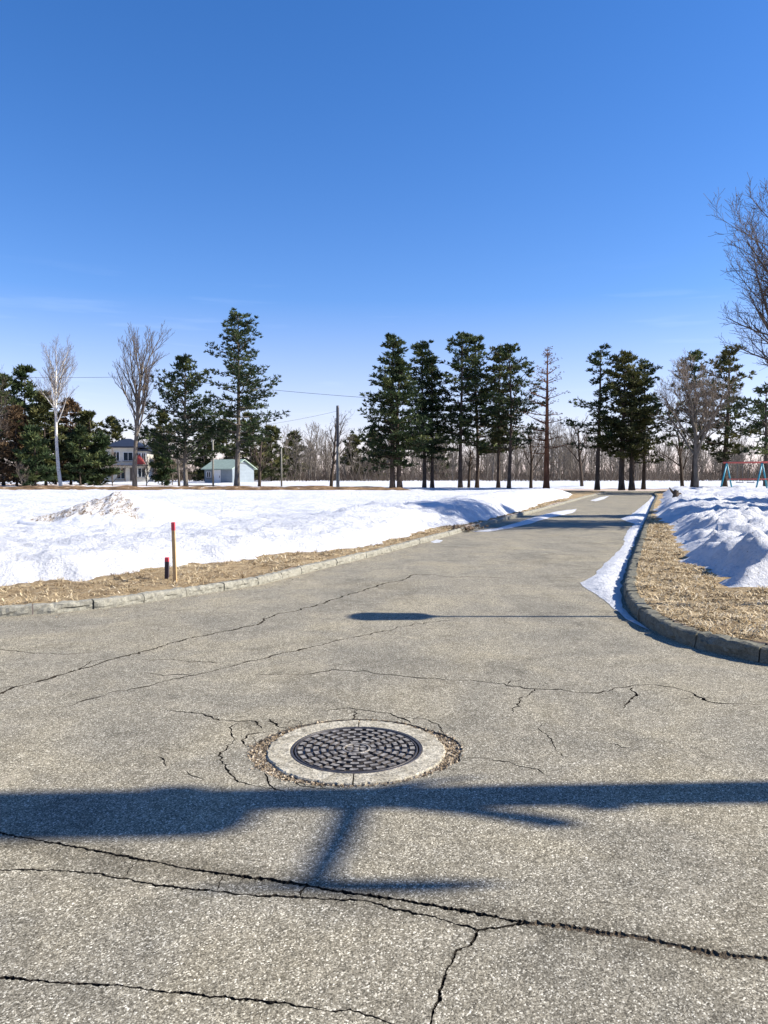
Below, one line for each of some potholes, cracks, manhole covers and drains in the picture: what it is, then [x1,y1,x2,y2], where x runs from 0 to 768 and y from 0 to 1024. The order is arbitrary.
crack [458,724,567,776]
manhole cover [266,720,446,787]
crack [0,831,768,1024]
crack [0,574,494,694]
crack [167,708,444,791]
